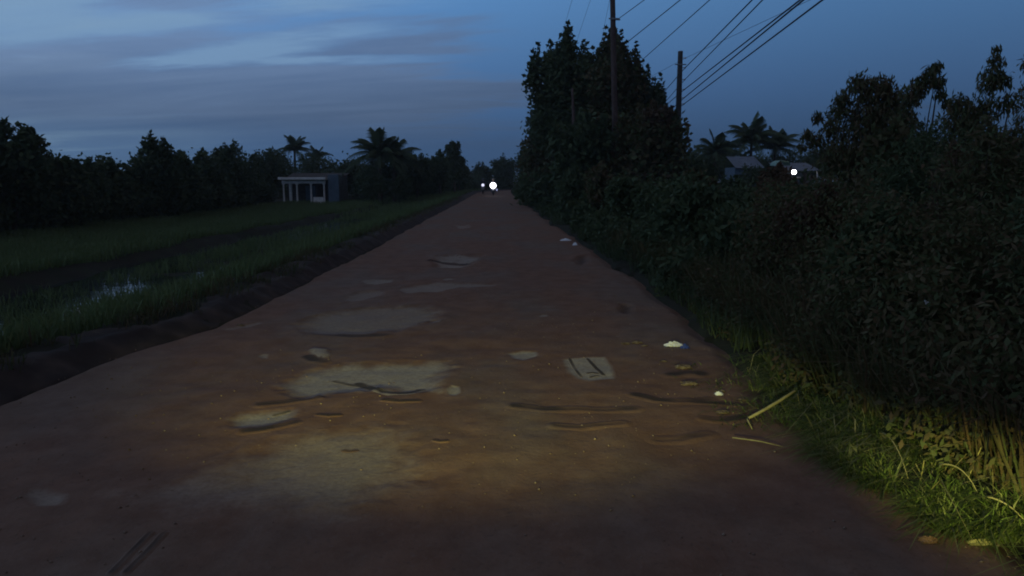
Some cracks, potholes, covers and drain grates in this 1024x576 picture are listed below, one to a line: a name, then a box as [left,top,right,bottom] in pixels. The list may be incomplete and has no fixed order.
crack [234,333,426,435]
